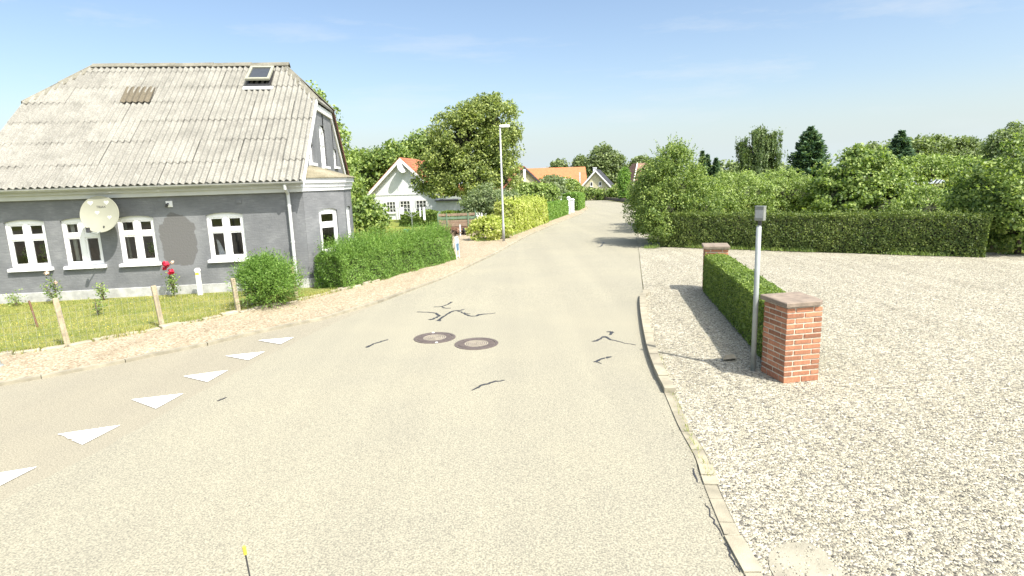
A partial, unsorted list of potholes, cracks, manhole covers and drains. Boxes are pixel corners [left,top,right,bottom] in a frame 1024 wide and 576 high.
manhole cover [454,337,498,350]
crack [687,443,740,572]
manhole cover [414,332,456,344]
